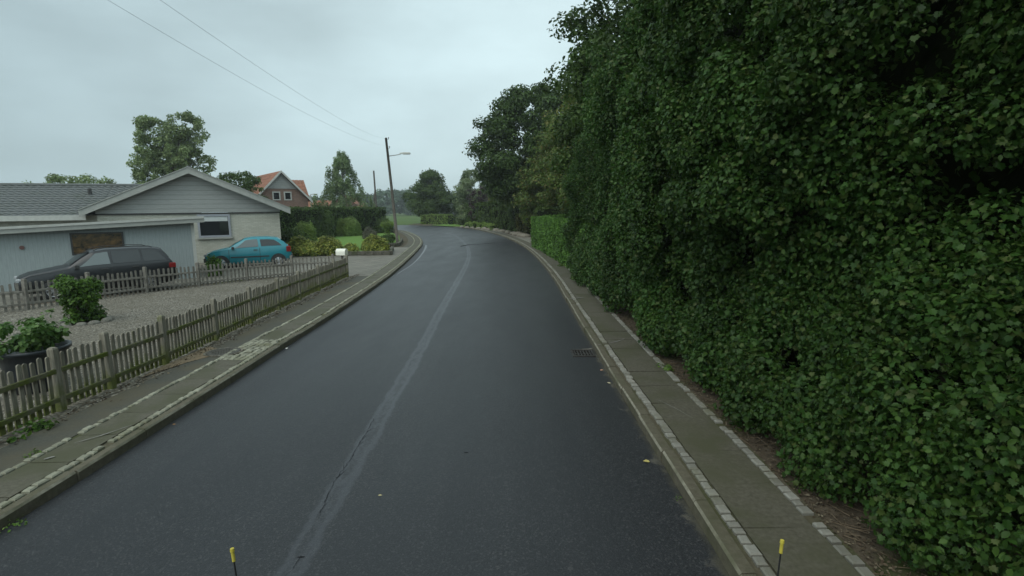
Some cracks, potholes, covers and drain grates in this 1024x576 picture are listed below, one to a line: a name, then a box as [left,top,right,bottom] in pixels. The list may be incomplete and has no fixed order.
drain grate [570,348,596,357]
crack [286,419,374,575]
